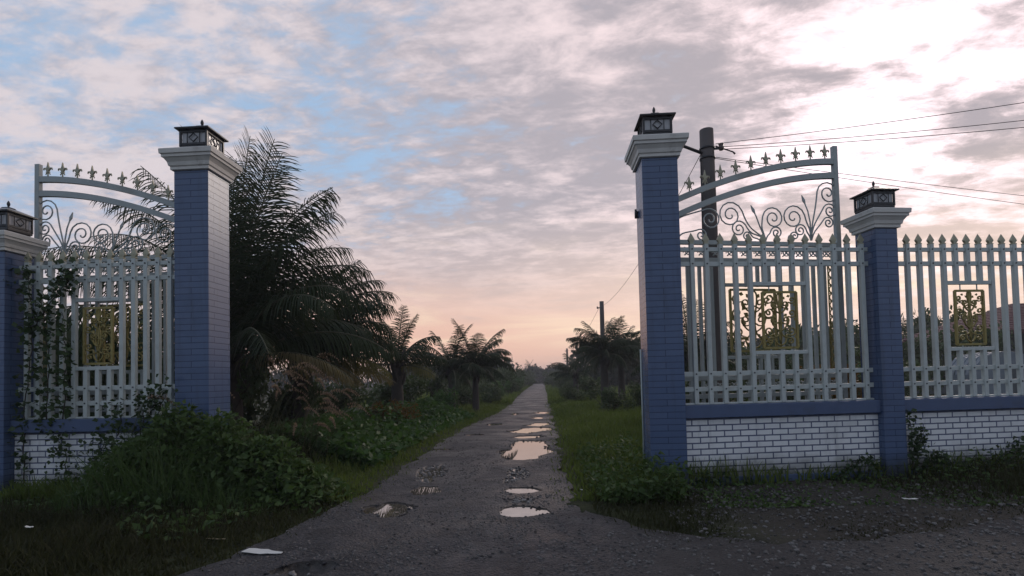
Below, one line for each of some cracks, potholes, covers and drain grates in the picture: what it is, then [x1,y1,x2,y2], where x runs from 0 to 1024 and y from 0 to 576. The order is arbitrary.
pothole [496,440,555,460]
pothole [410,486,442,495]
pothole [501,486,542,494]
pothole [360,501,419,518]
pothole [263,560,340,576]
pothole [500,504,551,517]
pothole [503,466,531,483]
pothole [415,463,448,483]
